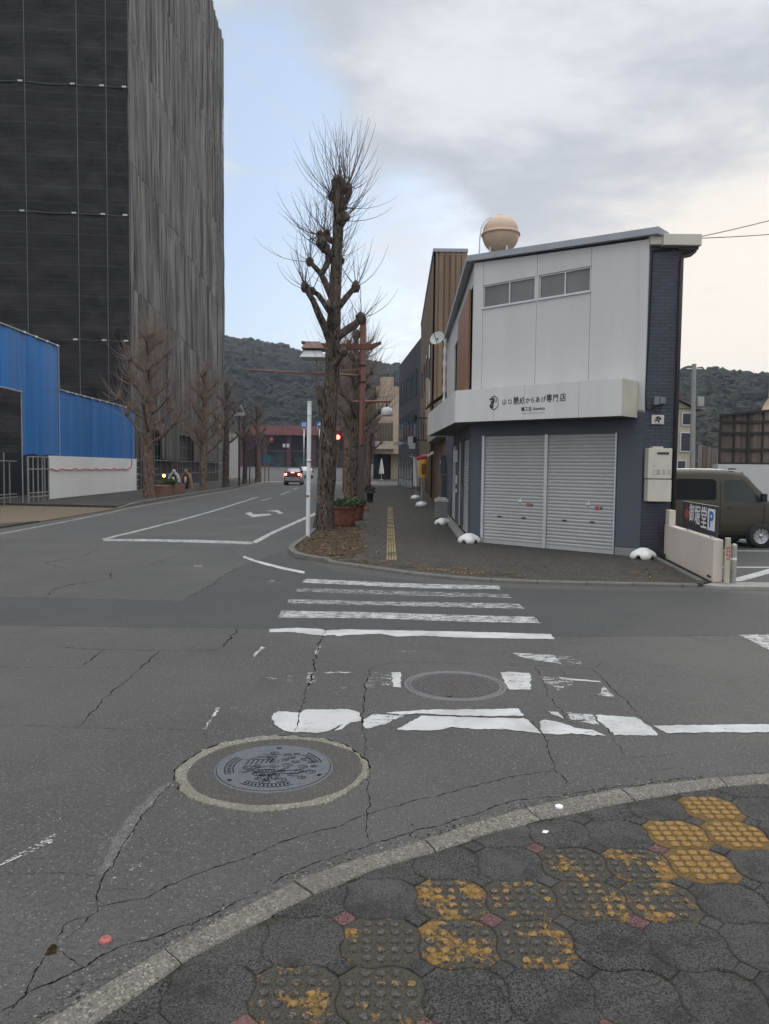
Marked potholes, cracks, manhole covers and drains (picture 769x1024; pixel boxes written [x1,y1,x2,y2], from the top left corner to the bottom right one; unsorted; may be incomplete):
manhole cover [403,671,507,701]
manhole cover [173,735,371,813]
crack [2,631,696,1015]
